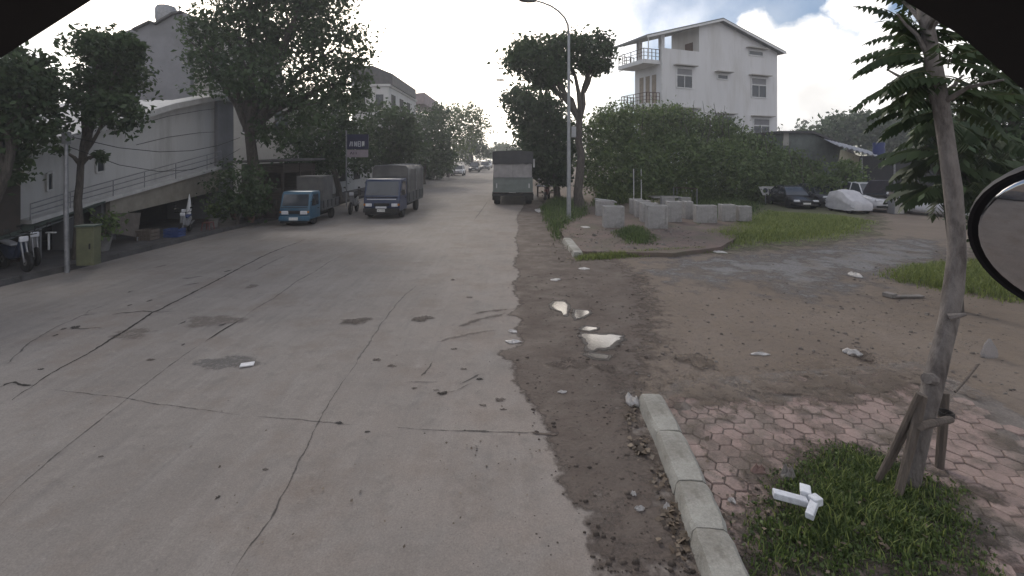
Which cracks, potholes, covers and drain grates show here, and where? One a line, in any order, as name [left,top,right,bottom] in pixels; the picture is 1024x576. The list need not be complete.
crack [0,242,298,400]
pothole [549,300,571,317]
pothole [577,331,626,352]
